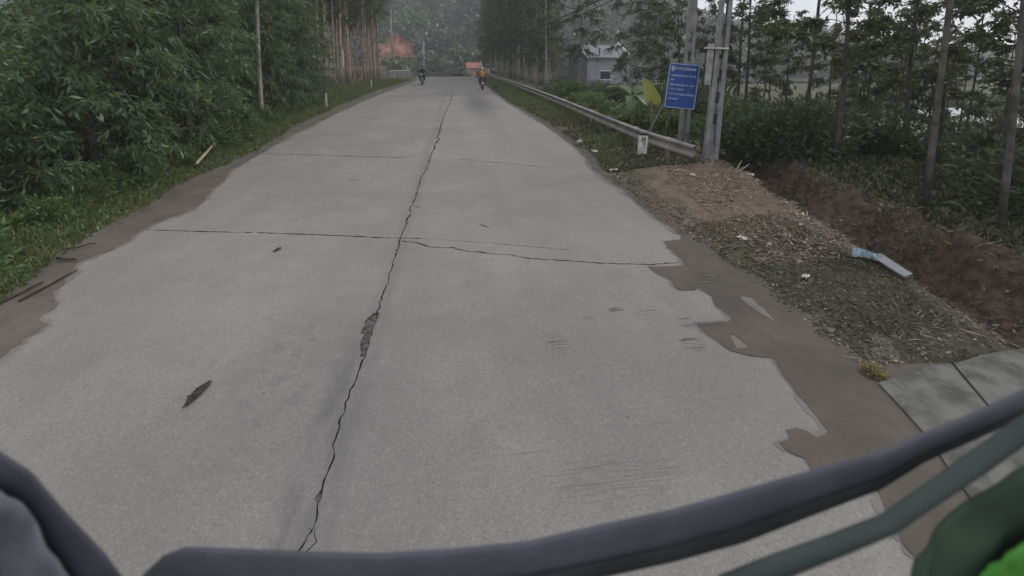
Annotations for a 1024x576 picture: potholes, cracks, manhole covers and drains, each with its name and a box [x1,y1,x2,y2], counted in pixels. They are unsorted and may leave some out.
crack [160,94,678,551]
pothole [360,312,379,358]
